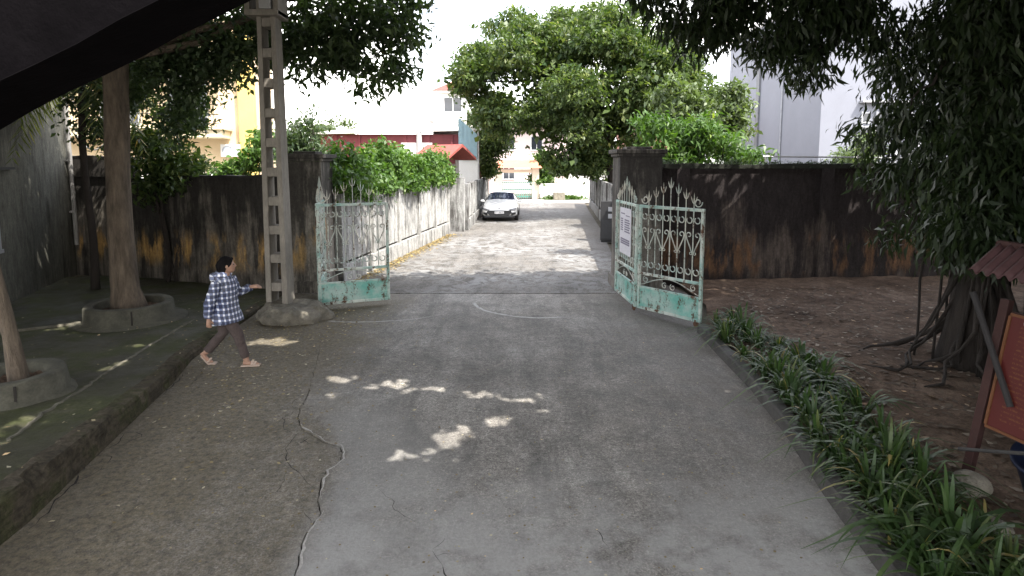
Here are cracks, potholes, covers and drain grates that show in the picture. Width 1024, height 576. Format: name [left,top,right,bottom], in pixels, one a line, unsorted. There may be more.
crack [277,385,345,576]
crack [29,432,143,529]
